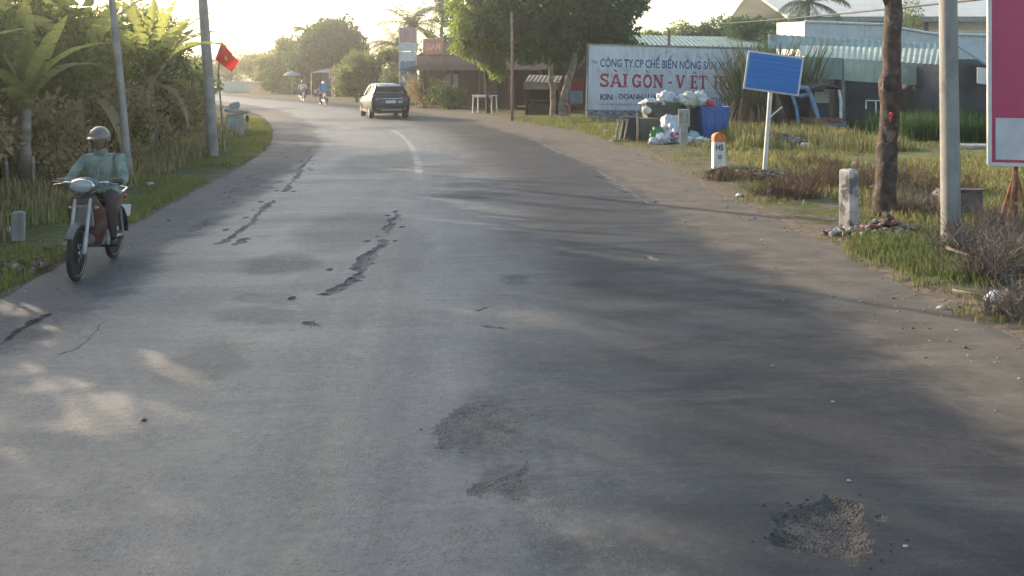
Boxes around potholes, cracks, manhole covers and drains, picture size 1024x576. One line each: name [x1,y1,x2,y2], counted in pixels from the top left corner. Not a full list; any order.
crack [188,154,319,246]
crack [287,210,406,301]
pothole [751,492,908,569]
pothole [419,402,533,453]
pothole [466,460,534,503]
crack [0,313,115,355]
